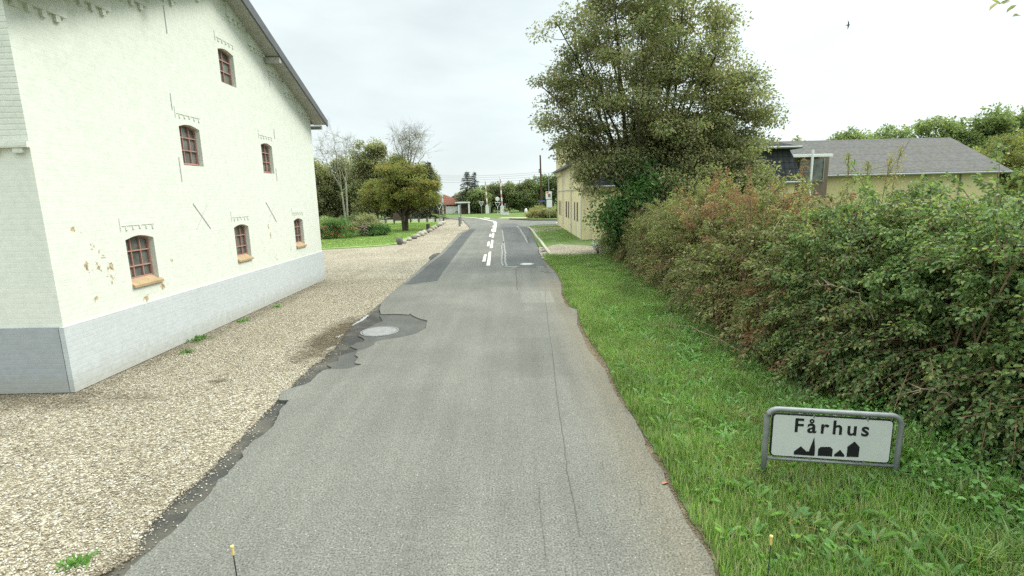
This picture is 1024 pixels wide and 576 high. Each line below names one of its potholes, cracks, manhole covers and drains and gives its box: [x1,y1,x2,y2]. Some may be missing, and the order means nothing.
manhole cover [360,326,399,337]
crack [545,294,581,538]
